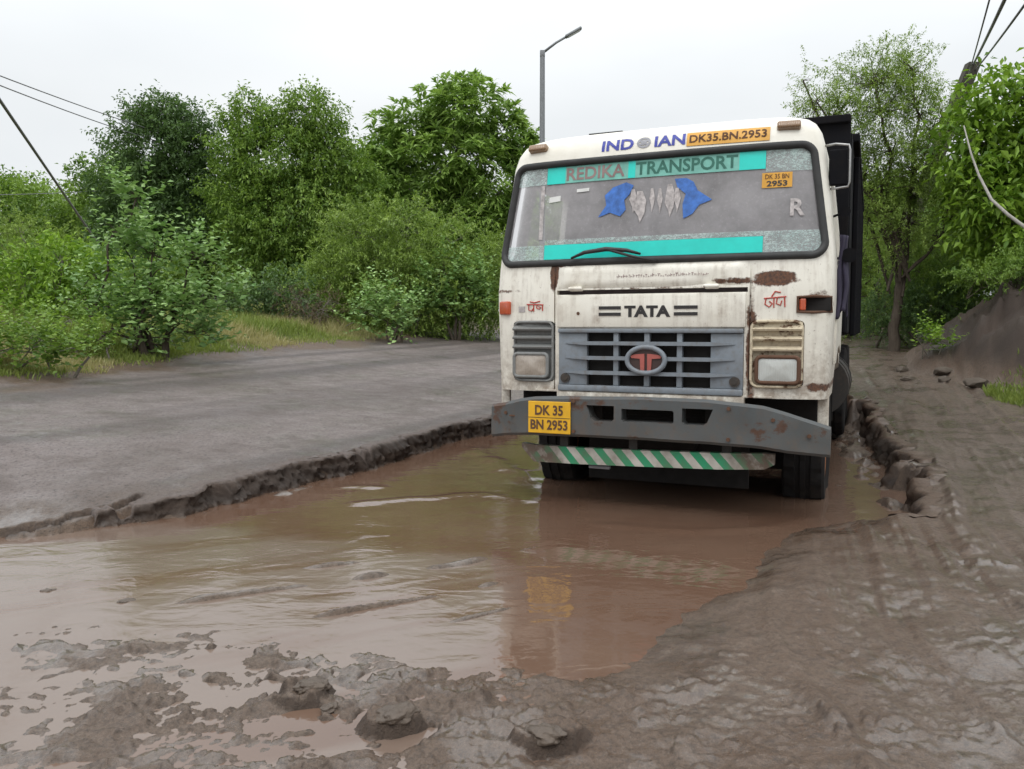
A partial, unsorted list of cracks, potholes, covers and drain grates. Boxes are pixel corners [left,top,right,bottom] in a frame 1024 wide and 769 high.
pothole [40,392,954,718]
